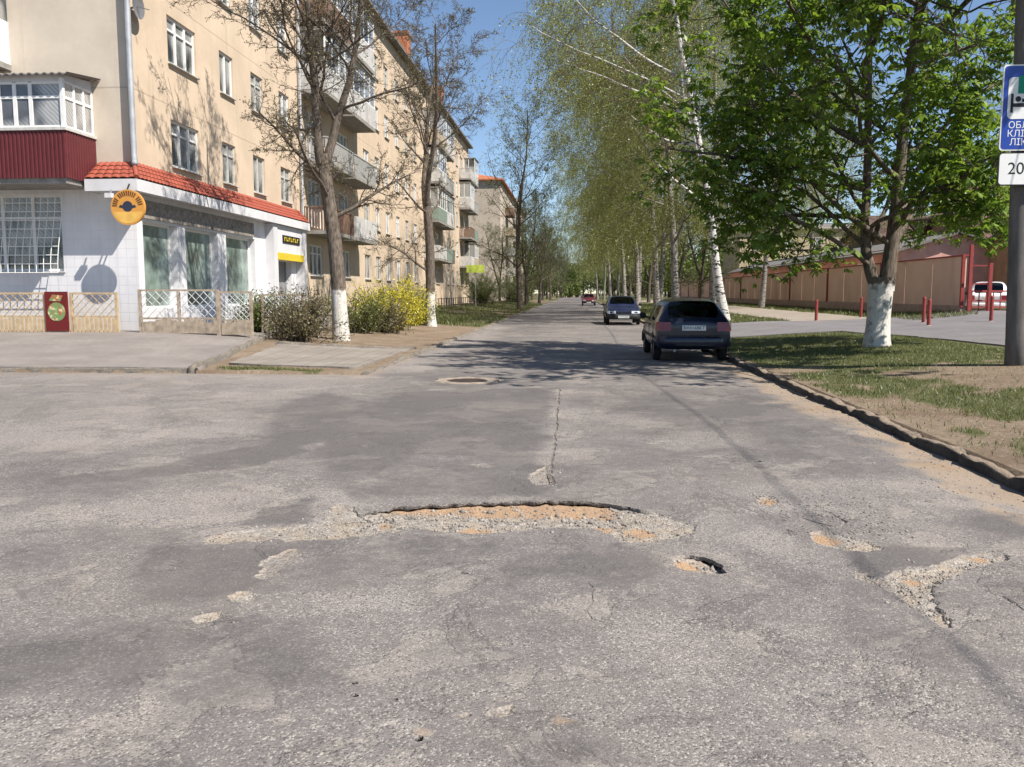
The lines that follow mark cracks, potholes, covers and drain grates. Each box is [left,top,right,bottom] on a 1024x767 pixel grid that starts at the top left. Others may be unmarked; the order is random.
pothole [757,496,780,505]
pothole [855,553,1011,628]
pothole [227,591,260,603]
pothole [810,530,885,552]
pothole [254,549,303,580]
crack [547,389,561,485]
pothole [670,555,727,574]
crack [1002,596,1024,610]
crack [586,583,626,625]
pothole [191,611,223,624]
pothole [202,500,697,545]
